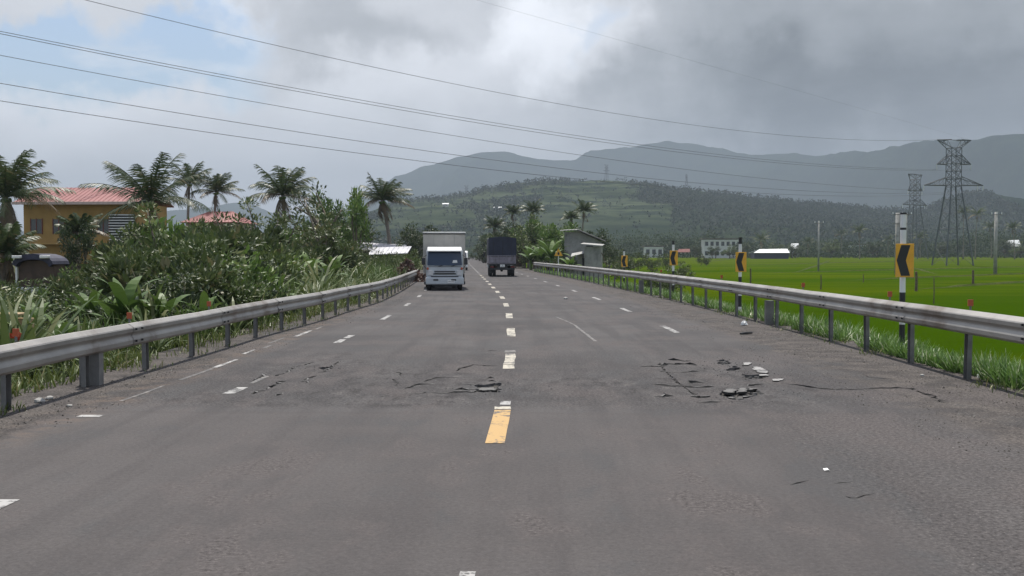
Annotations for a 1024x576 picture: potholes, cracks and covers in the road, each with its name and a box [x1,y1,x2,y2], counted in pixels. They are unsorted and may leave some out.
crack [642,358,720,403]
crack [790,480,874,498]
crack [791,375,945,403]
crack [392,350,497,394]
crack [251,361,341,396]
